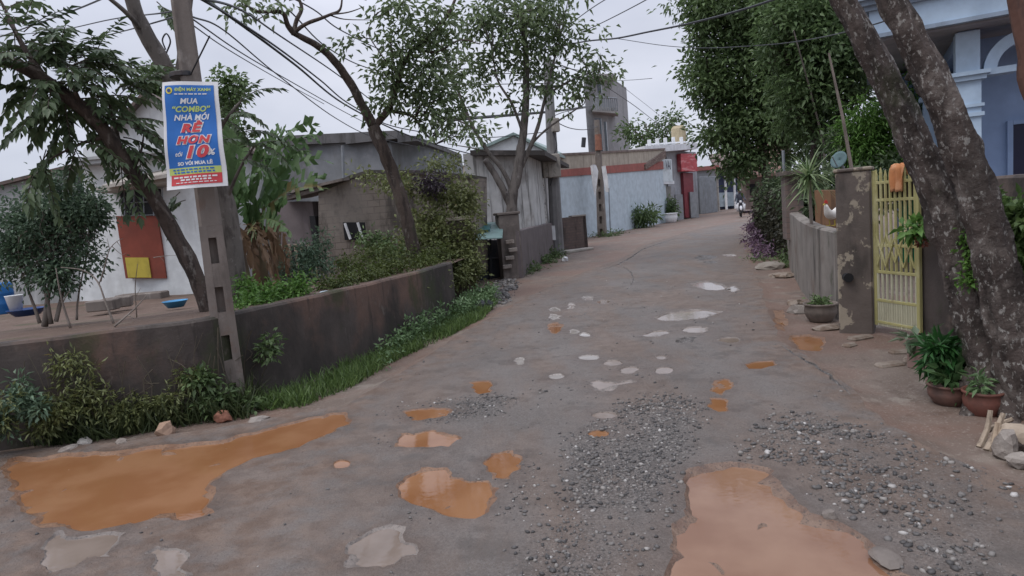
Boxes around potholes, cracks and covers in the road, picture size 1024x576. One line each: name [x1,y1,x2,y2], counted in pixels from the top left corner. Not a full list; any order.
pothole [403,407,452,420]
pothole [396,467,499,519]
pothole [745,360,777,369]
pothole [483,450,523,479]
pothole [788,334,826,351]
pothole [664,461,910,576]
pothole [394,430,462,447]
crack [782,345,850,394]
pothole [710,379,734,395]
pothole [0,412,352,531]
pothole [707,398,729,412]
pothole [469,380,493,394]
